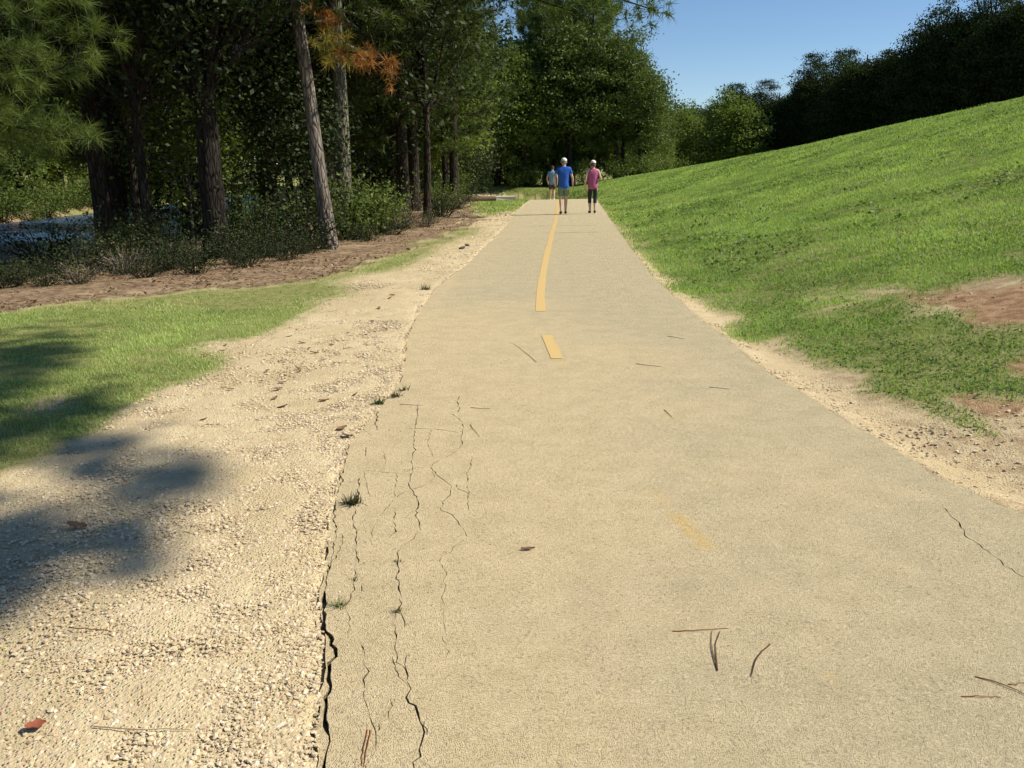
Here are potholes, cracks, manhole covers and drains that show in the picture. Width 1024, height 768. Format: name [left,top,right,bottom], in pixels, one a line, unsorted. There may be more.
crack [321,396,472,768]
